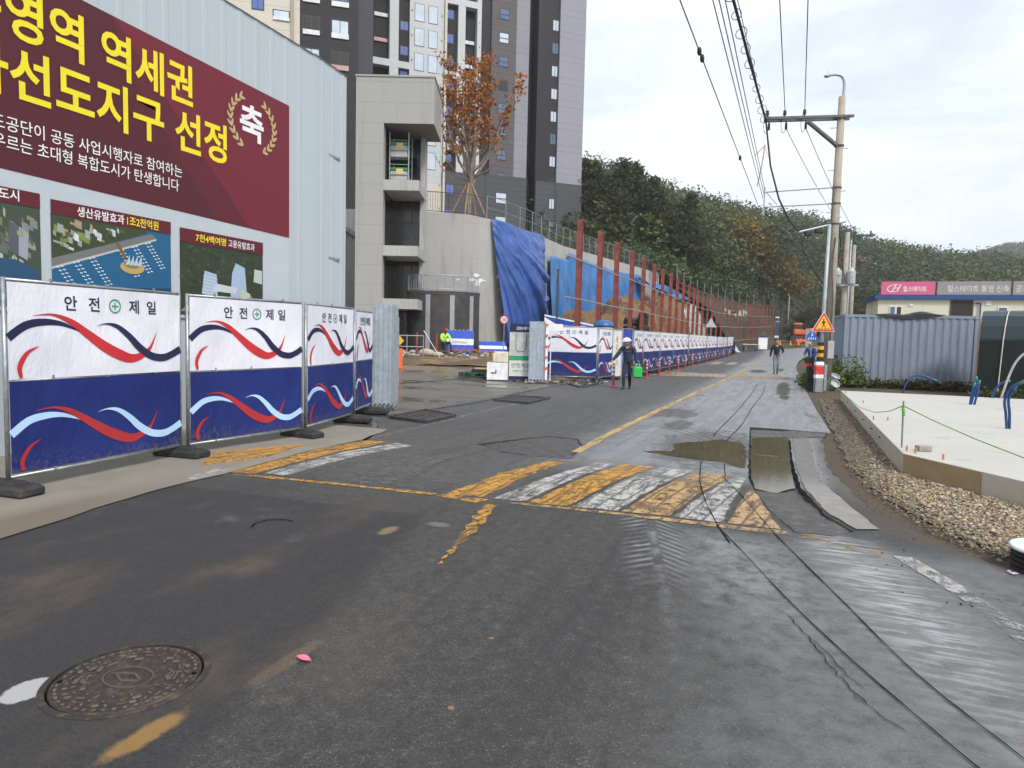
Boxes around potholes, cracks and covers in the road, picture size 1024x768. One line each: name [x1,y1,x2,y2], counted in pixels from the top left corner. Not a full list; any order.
crack [699,462,1024,768]
manhole cover [35,643,211,720]
pothole [747,427,853,536]
drain grate [388,409,456,423]
drain grate [493,395,550,404]
